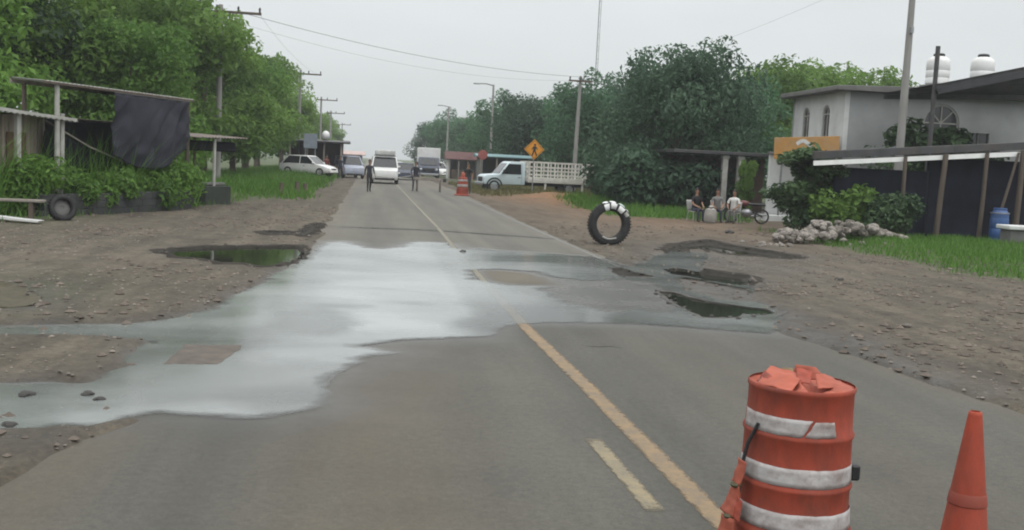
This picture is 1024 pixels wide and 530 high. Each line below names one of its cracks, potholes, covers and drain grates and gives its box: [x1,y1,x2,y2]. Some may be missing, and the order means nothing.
pothole [607,267,656,278]
pothole [654,290,787,319]
pothole [149,244,312,267]
pothole [663,268,765,287]
pothole [655,239,809,260]
